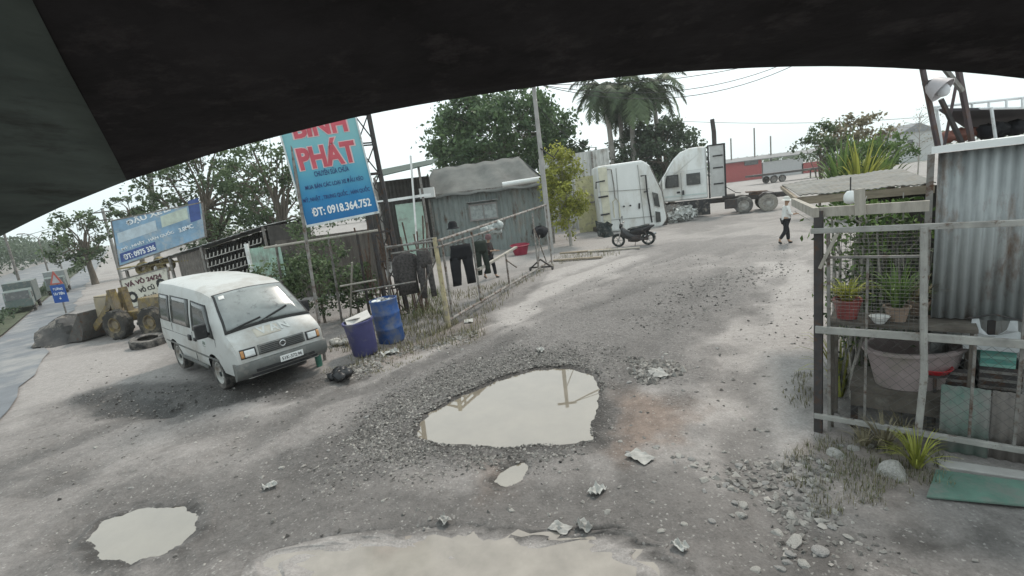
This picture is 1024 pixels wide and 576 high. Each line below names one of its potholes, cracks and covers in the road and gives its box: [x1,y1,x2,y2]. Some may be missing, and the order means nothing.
pothole [397,360,617,457]
pothole [66,491,218,576]
pothole [482,456,538,493]
